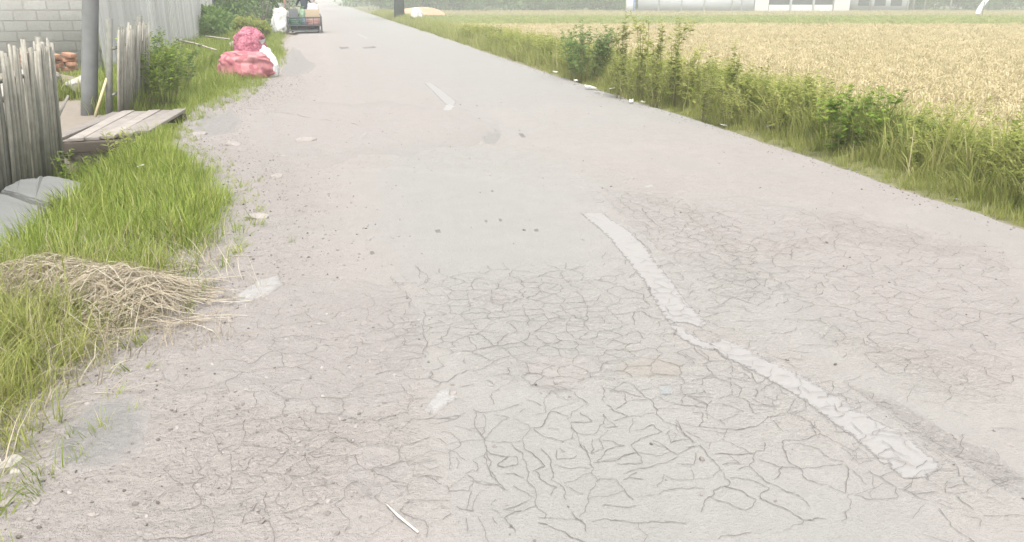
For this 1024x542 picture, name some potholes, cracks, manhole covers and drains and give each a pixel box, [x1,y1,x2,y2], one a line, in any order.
crack [144,188,1024,542]
